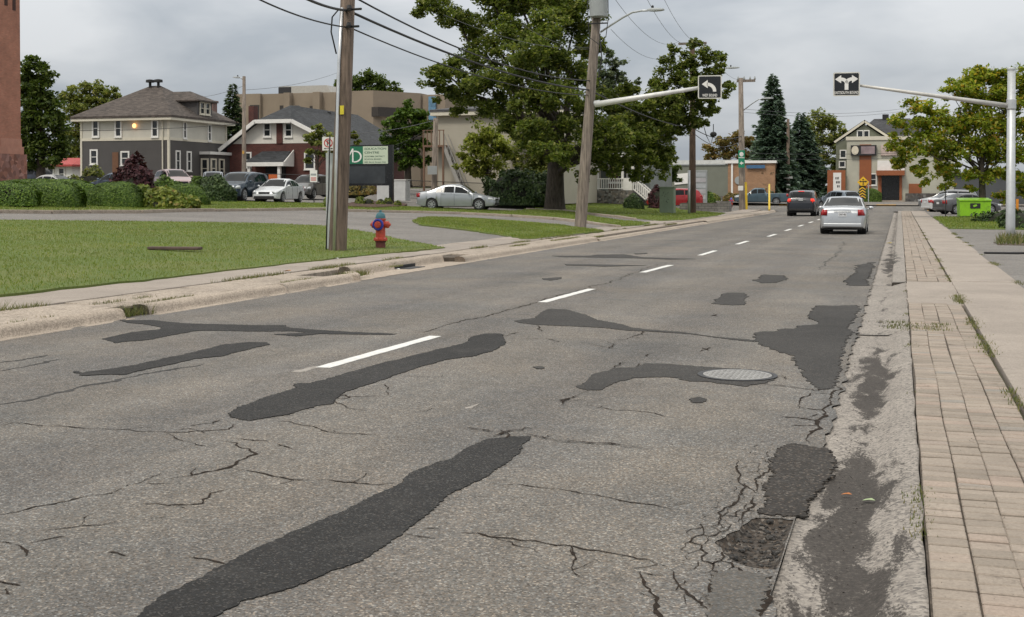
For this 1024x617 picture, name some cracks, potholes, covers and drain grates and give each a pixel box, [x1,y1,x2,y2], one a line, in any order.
manhole cover [697,369,778,381]
crack [3,420,386,485]
crack [462,375,819,617]
crack [0,474,226,556]
pothole [715,518,793,569]
